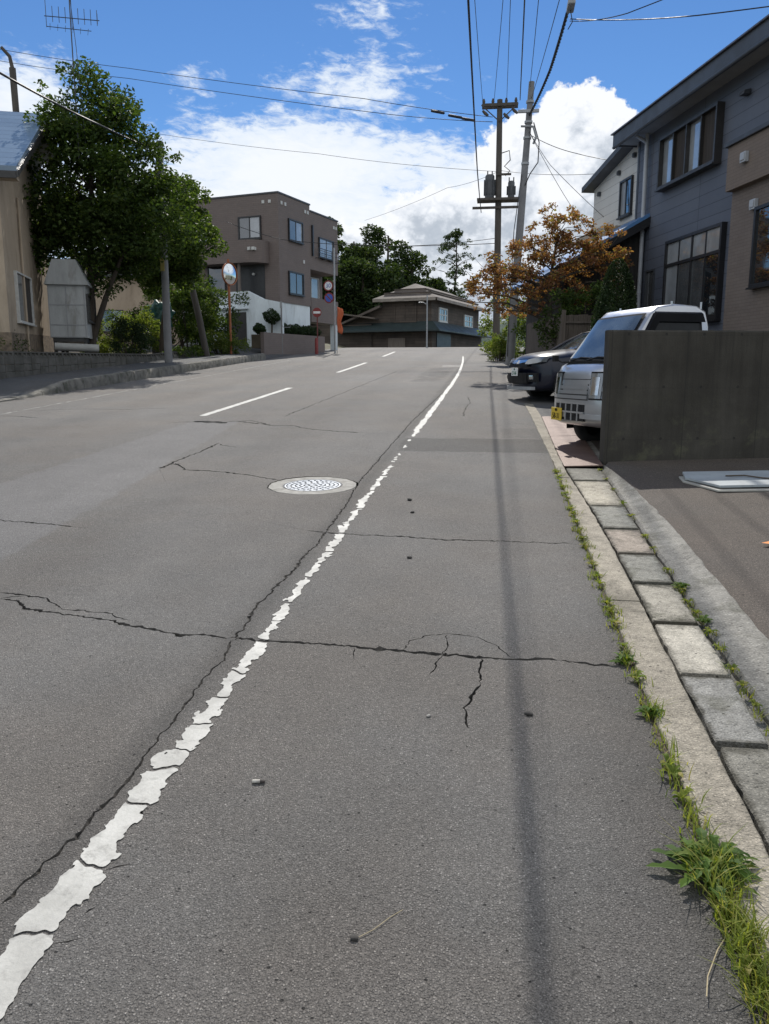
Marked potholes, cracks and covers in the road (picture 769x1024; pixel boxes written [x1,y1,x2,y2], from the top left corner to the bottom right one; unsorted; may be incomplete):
manhole cover [268,477,358,495]
crack [0,392,611,913]
